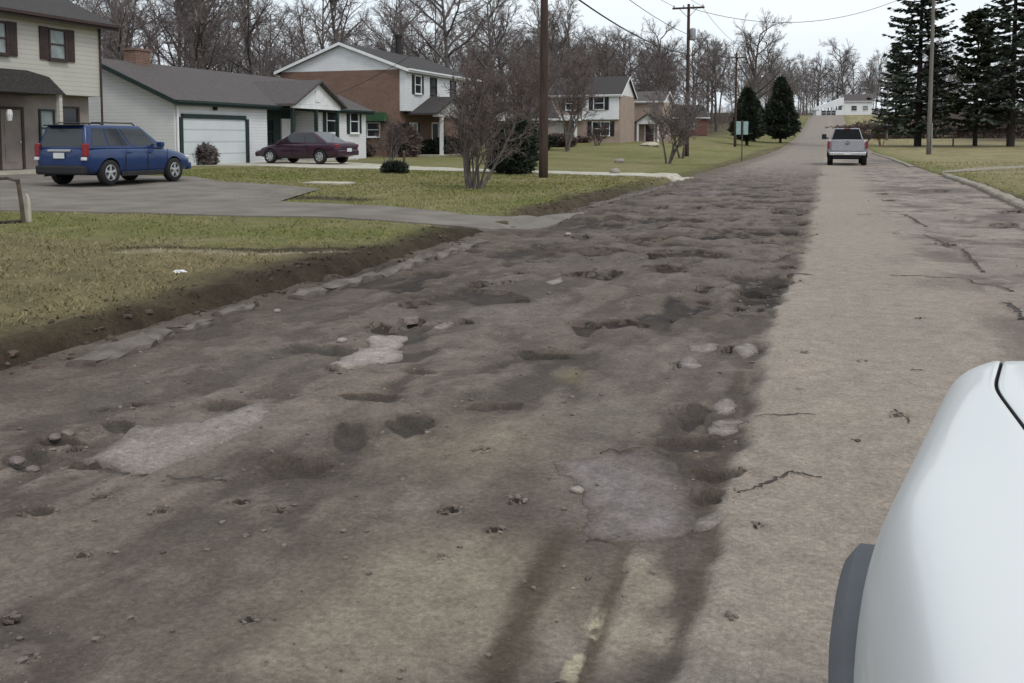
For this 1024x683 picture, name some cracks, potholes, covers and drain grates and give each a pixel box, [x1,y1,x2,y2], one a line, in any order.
pothole [192,398,276,415]
pothole [679,466,757,487]
pothole [590,318,660,331]
pothole [688,486,732,511]
pothole [667,399,717,436]
pothole [376,412,443,443]
crack [737,470,822,493]
pothole [7,504,62,521]
pothole [562,318,606,340]
crack [857,213,1024,319]
pothole [93,416,142,438]
